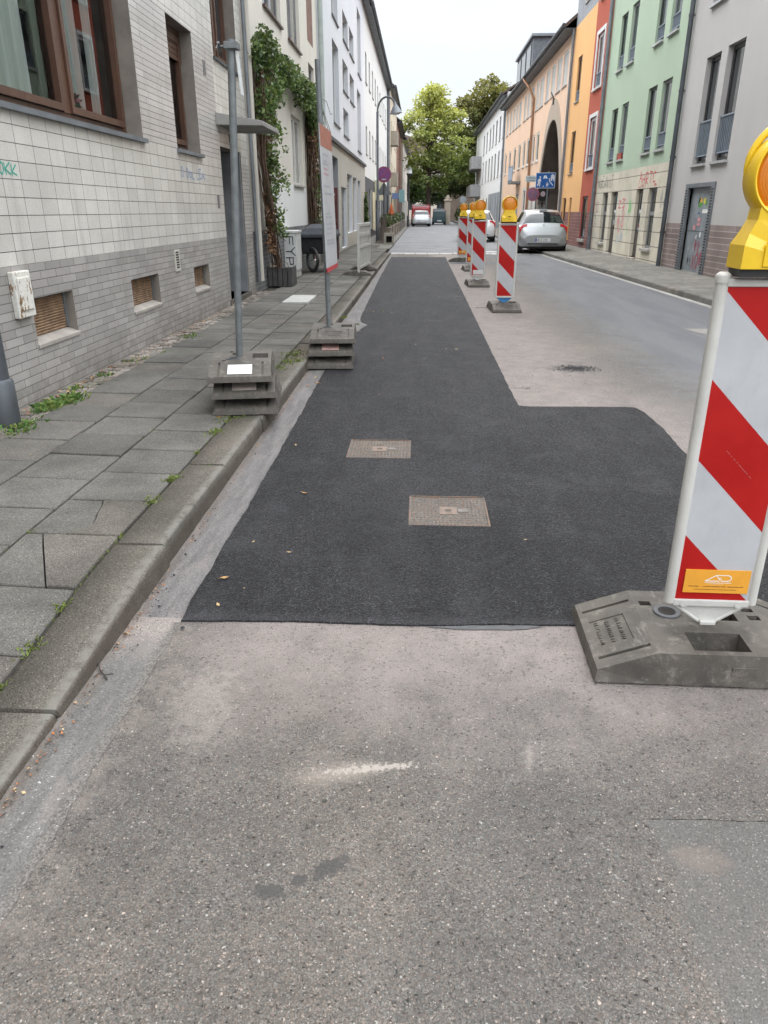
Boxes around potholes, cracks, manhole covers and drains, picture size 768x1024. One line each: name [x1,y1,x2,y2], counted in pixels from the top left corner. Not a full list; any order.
manhole cover [409,495,491,526]
manhole cover [346,439,411,458]
